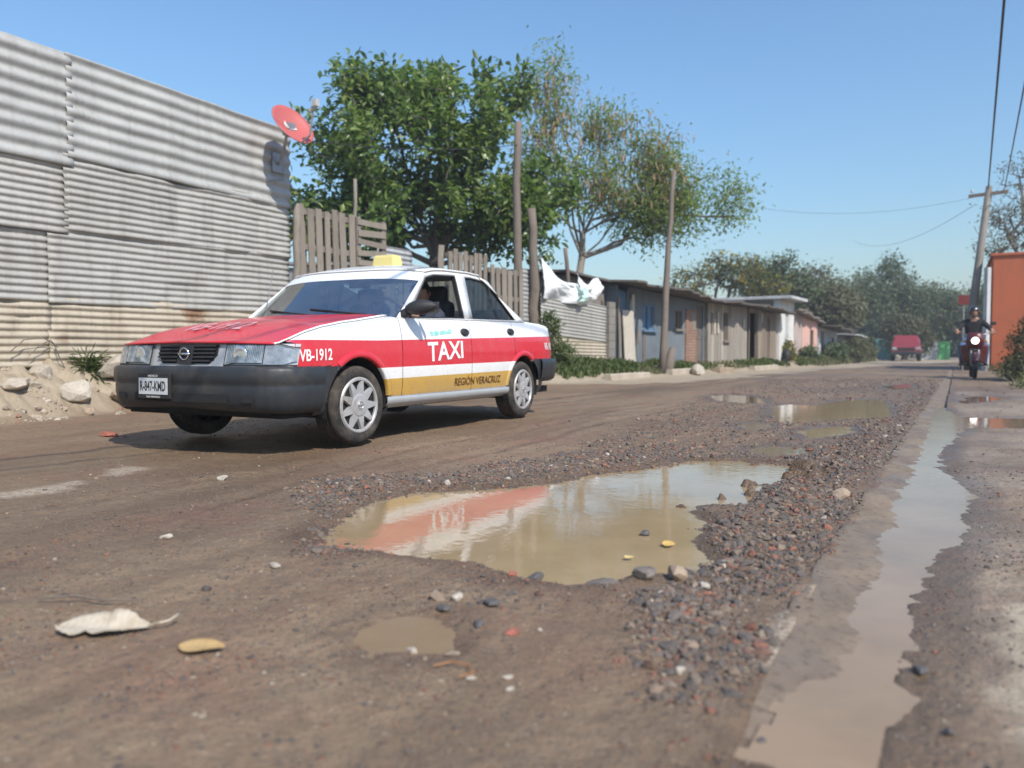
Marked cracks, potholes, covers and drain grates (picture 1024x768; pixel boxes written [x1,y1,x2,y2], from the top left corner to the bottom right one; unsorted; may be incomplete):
pothole [758,398,902,424]
pothole [702,394,772,403]
pothole [734,443,816,457]
pothole [327,608,474,665]
pothole [780,424,868,439]
pothole [729,420,779,430]
pothole [305,456,837,586]
